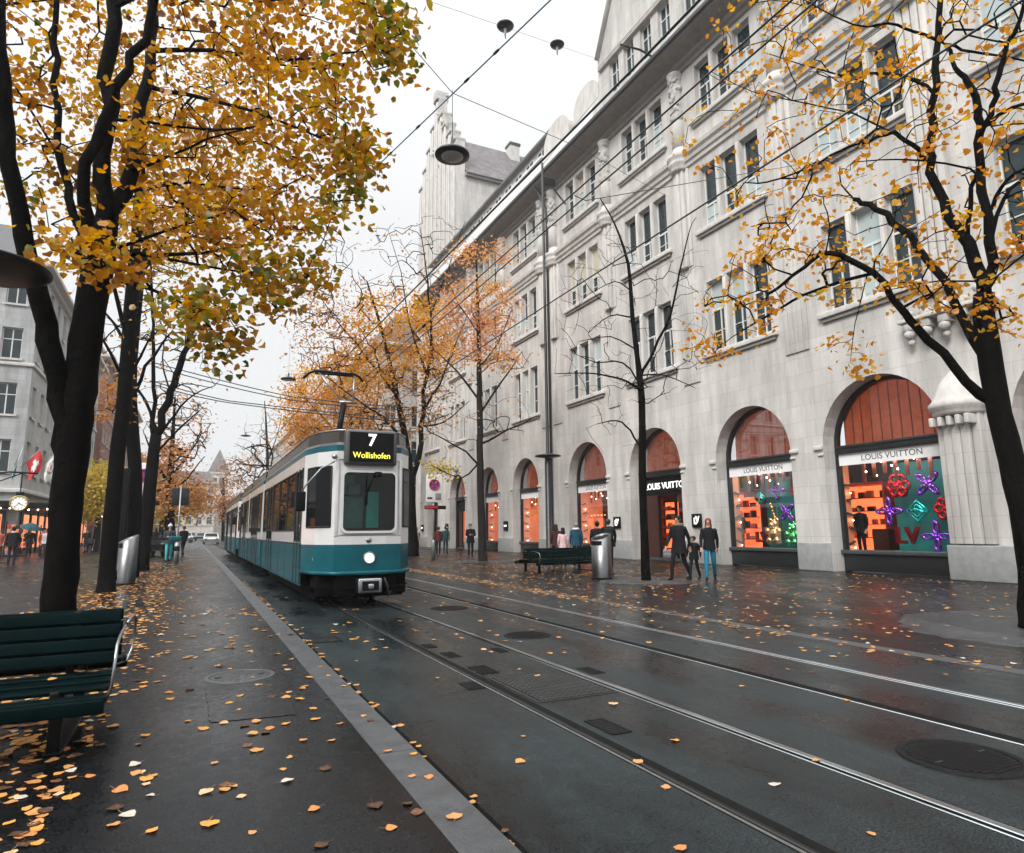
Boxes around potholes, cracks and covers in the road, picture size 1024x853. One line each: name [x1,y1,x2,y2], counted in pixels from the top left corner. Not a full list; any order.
manhole cover [503,631,551,639]
manhole cover [895,739,1024,779]
manhole cover [204,669,275,684]
